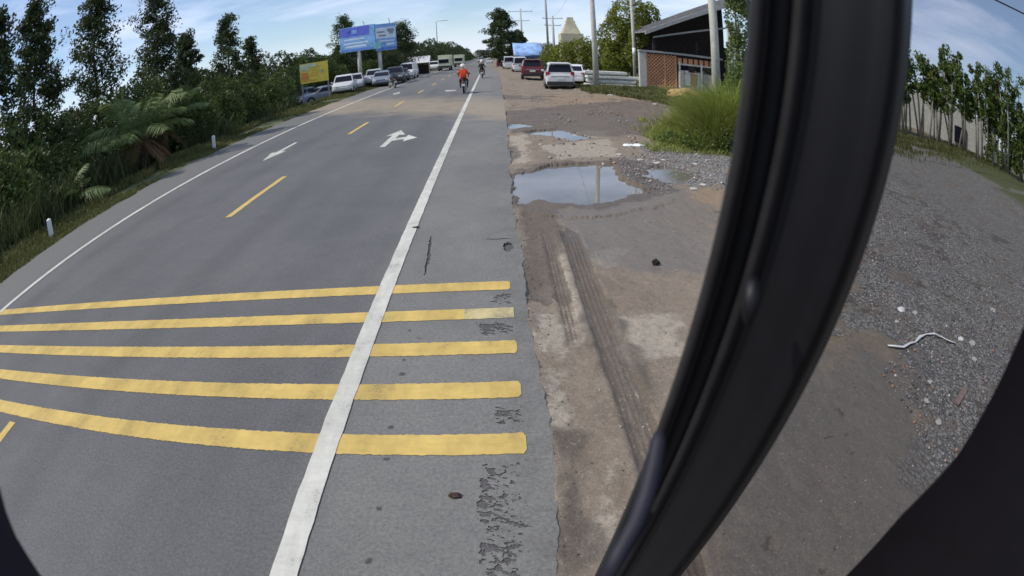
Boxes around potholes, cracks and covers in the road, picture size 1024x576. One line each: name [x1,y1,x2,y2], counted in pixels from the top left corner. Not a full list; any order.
crack [424,237,432,275]
